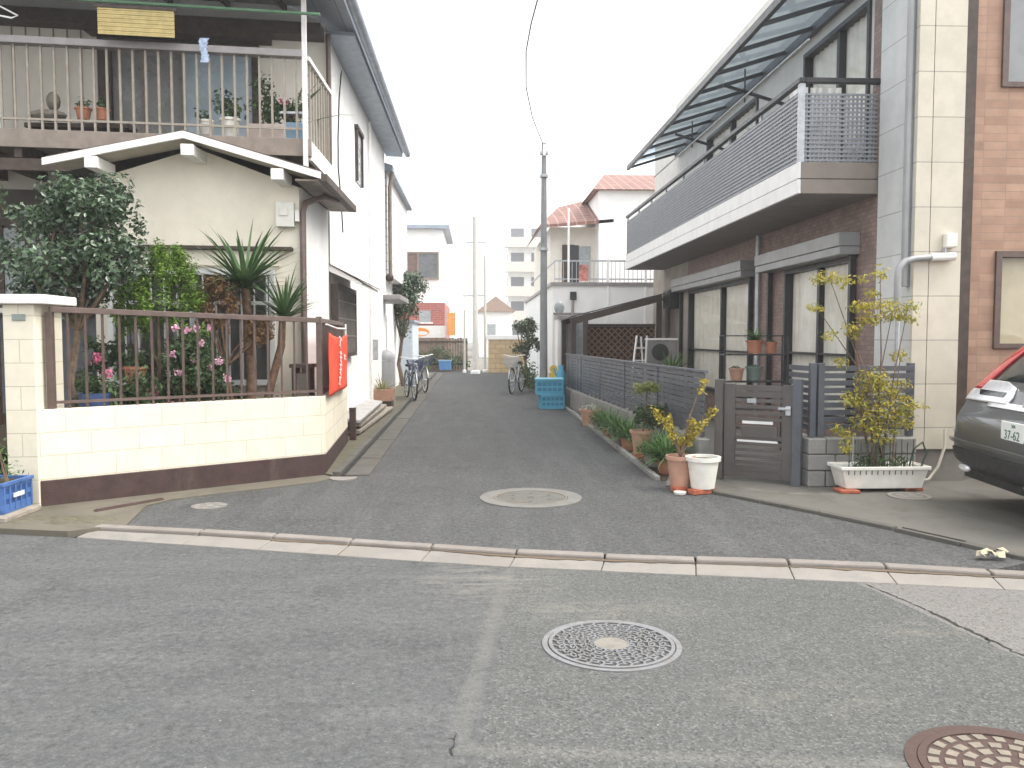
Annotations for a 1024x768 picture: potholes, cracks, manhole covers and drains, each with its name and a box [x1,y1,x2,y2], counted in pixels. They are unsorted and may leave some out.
manhole cover [904,725,1024,768]
drain grate [94,497,164,512]
utility cover [887,492,932,501]
manhole cover [480,488,582,509]
utility cover [191,502,228,510]
manhole cover [542,620,682,672]
